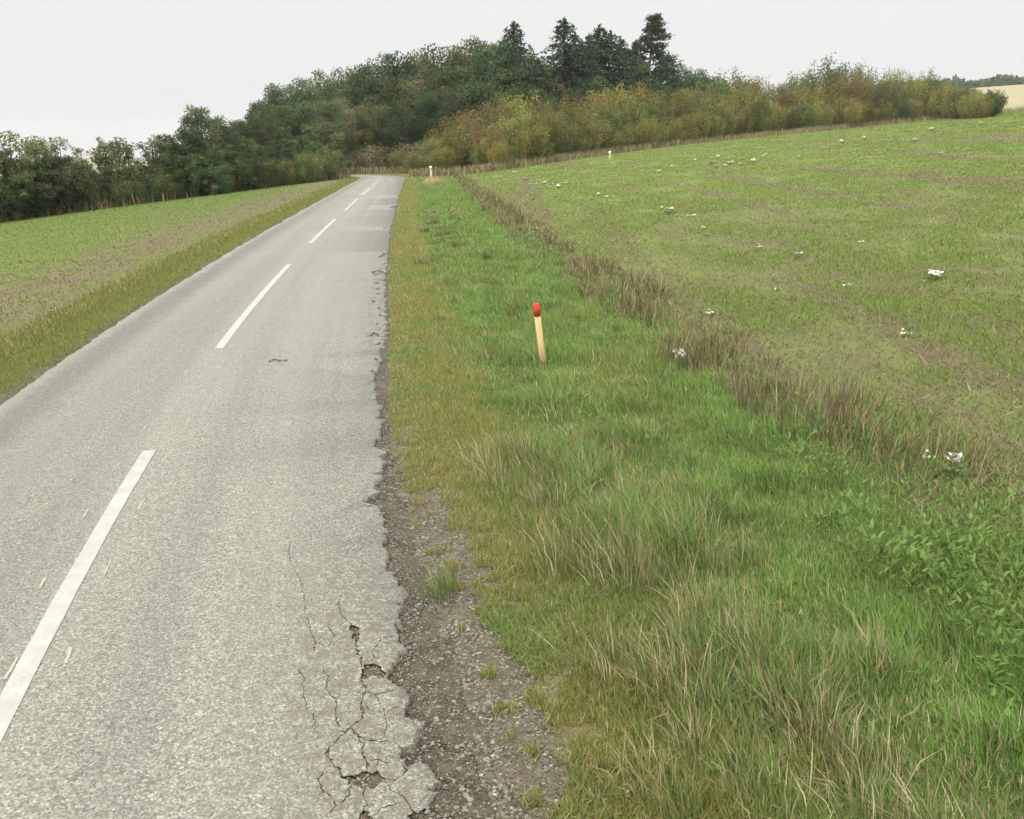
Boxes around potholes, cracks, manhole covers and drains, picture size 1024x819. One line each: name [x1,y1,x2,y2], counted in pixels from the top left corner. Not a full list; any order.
crack [288,542,431,817]
pothole [340,771,385,789]
pothole [361,663,386,679]
